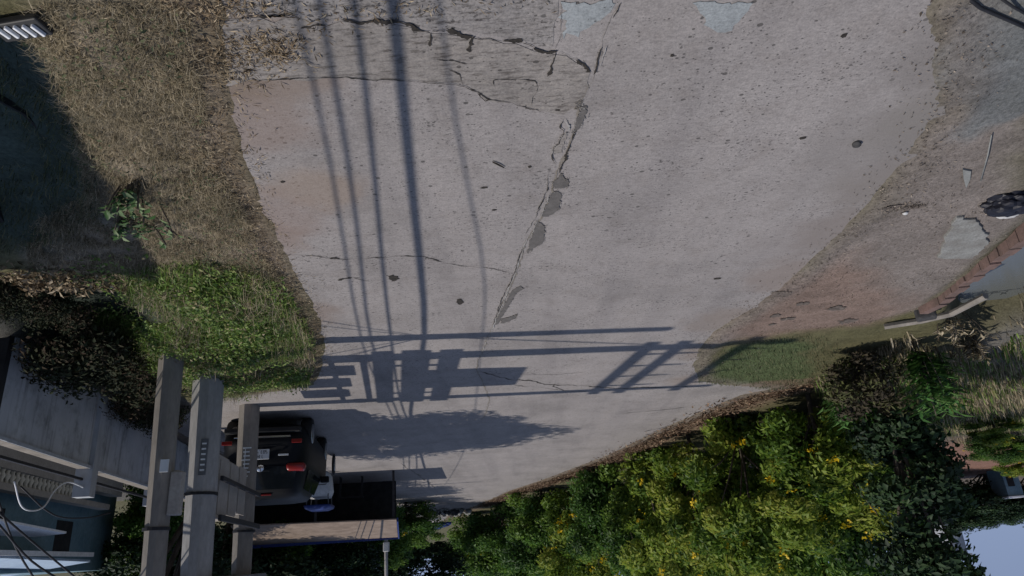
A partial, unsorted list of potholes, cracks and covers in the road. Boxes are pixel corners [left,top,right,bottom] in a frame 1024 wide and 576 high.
crack [477,371,663,392]
pothole [541,190,563,217]
pothole [527,221,546,253]
crack [219,13,590,116]
pothole [552,174,571,190]
crack [287,120,564,315]
